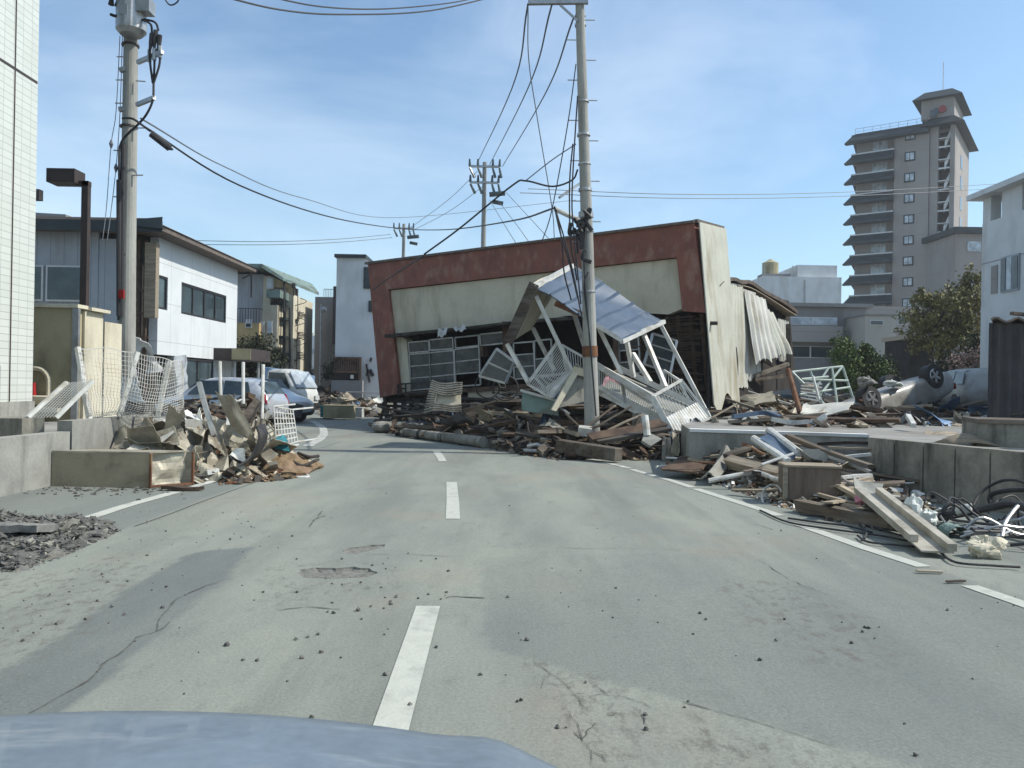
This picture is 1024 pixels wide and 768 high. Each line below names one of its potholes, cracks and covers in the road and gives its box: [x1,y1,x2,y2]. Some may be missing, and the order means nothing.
pothole [328,543,396,557]
pothole [281,564,393,584]
crack [534,661,651,760]
crack [28,583,213,714]
